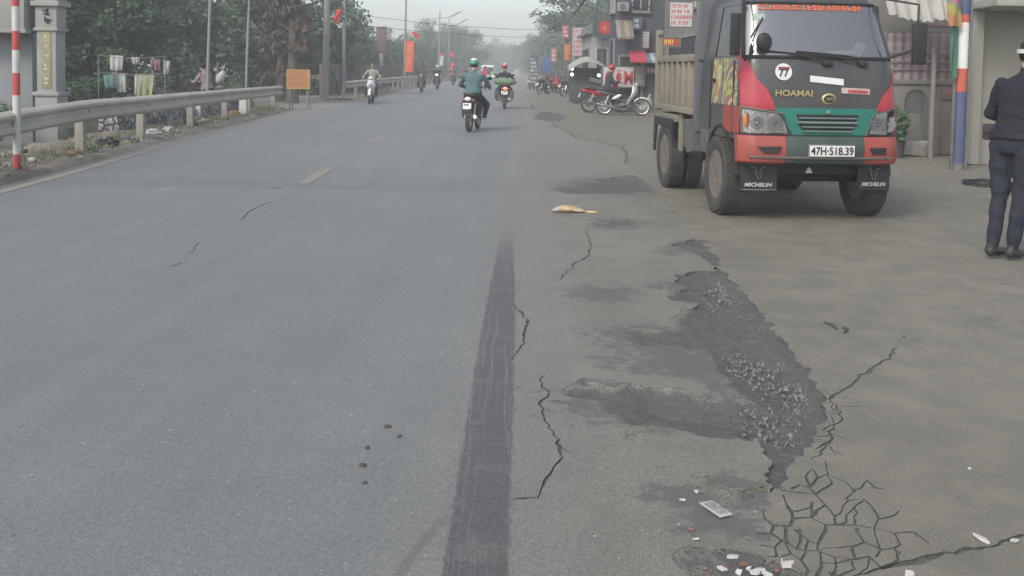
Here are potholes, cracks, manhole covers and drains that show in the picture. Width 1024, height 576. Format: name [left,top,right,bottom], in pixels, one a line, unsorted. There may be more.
pothole [670,545,806,576]
crack [551,228,592,283]
pothole [562,239,828,492]
crack [757,347,1024,576]
crack [512,302,570,499]
